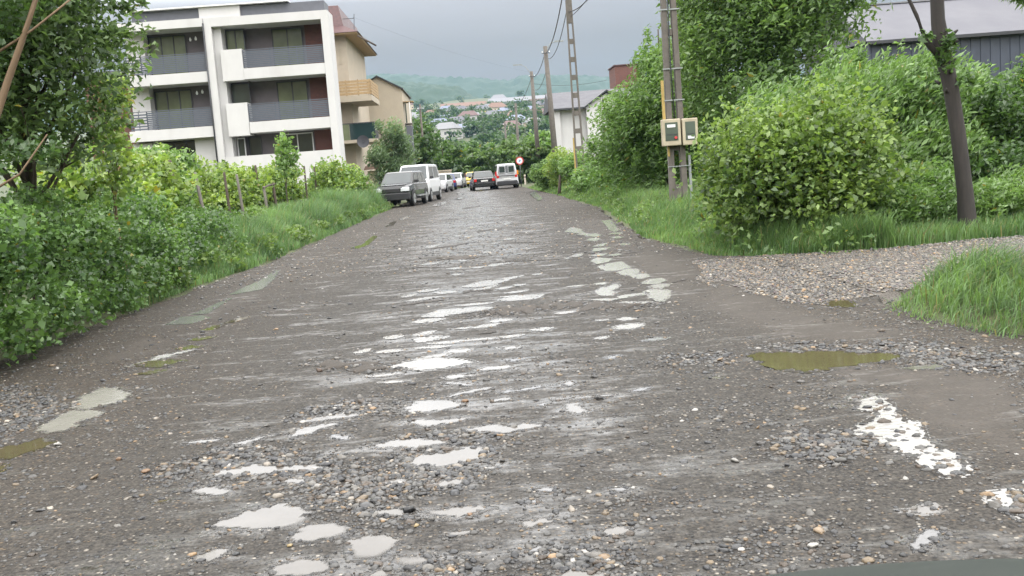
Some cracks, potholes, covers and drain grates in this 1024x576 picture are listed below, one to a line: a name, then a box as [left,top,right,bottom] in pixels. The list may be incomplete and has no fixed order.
pothole [744,351,901,374]
pothole [384,357,479,371]
pothole [642,288,672,302]
pothole [342,534,402,564]
pothole [202,500,324,532]
pothole [286,522,357,545]
pothole [35,410,109,434]
pothole [823,300,859,308]
pothole [400,446,504,467]
pothole [847,394,976,479]
pothole [597,261,632,271]
